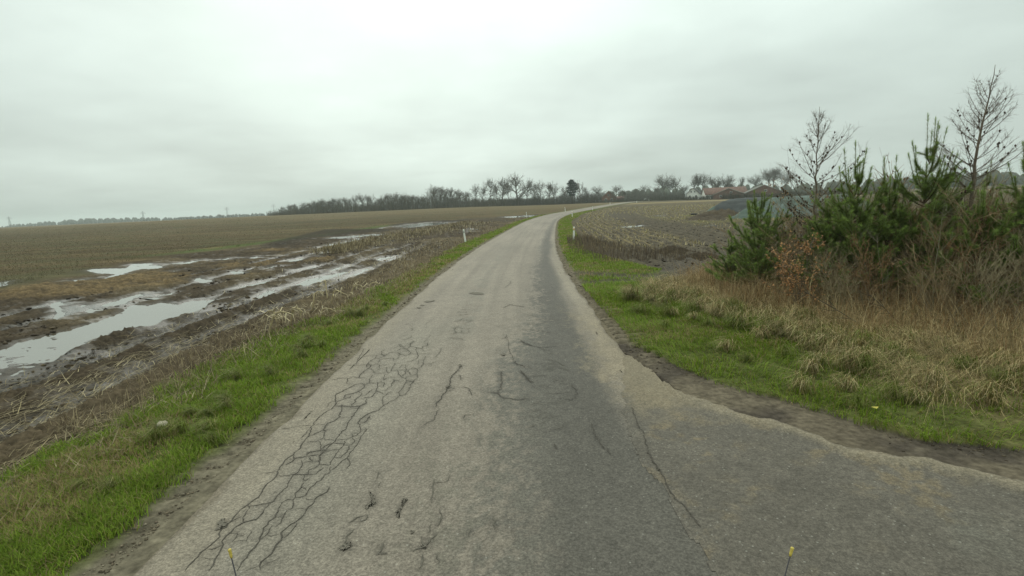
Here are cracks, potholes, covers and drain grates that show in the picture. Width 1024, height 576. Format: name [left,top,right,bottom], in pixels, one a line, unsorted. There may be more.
crack [494,301,578,448]
crack [186,304,472,570]
